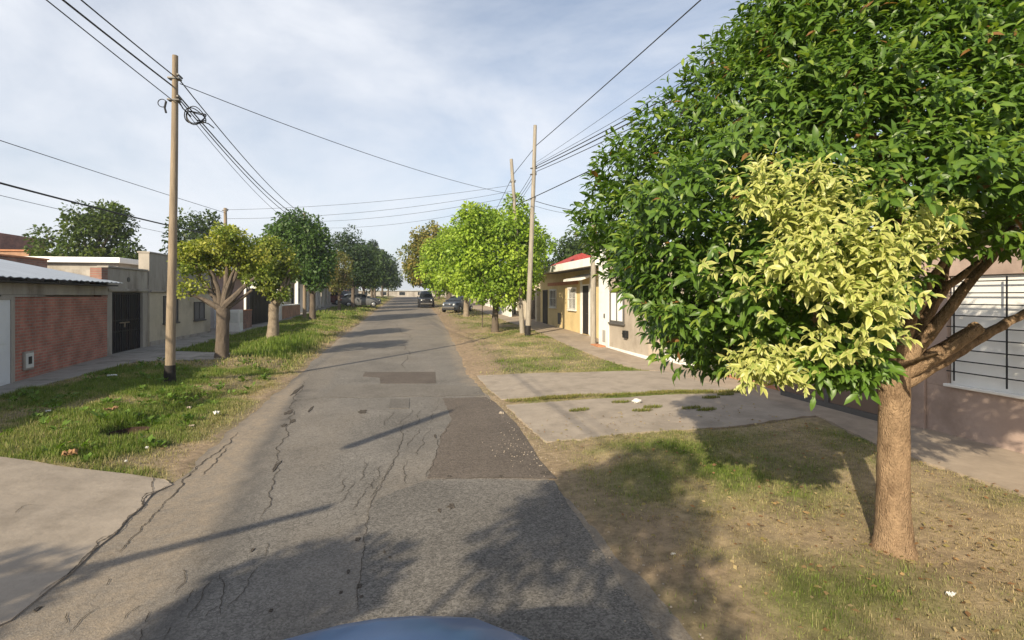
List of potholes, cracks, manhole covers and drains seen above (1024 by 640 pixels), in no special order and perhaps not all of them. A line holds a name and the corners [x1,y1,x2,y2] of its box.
crack [124,544,269,639]
crack [342,410,555,507]
crack [261,374,309,516]
